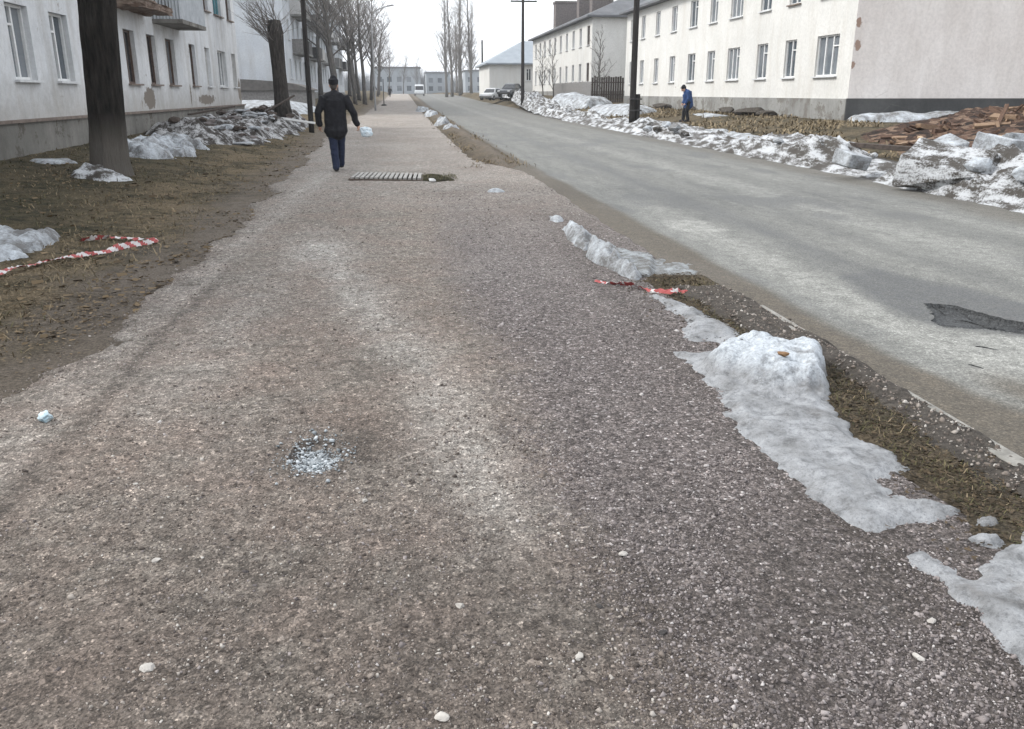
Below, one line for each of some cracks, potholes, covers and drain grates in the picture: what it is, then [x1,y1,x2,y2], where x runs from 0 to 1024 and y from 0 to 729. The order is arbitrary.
pothole [284,439,347,475]
